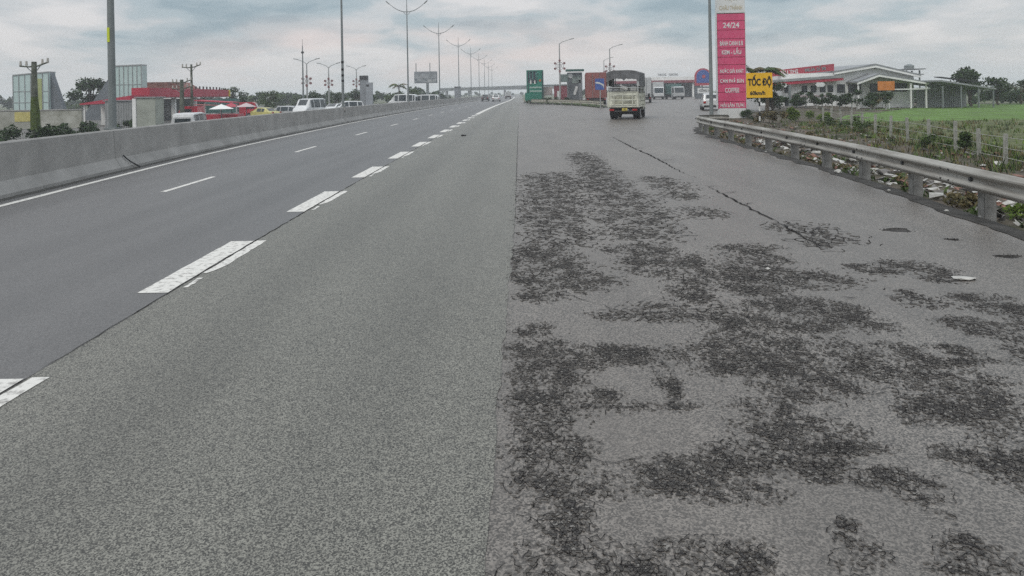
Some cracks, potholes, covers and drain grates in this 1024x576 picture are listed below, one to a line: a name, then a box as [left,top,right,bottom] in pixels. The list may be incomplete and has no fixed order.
crack [484,137,1024,576]
